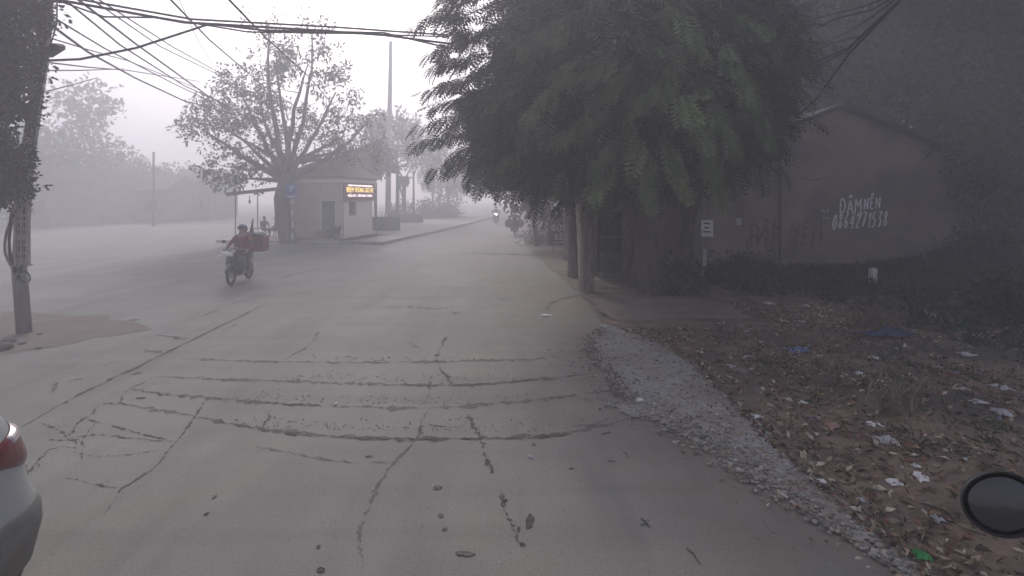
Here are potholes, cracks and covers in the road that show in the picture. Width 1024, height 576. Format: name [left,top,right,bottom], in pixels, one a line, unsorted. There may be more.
crack [22,294,639,566]
